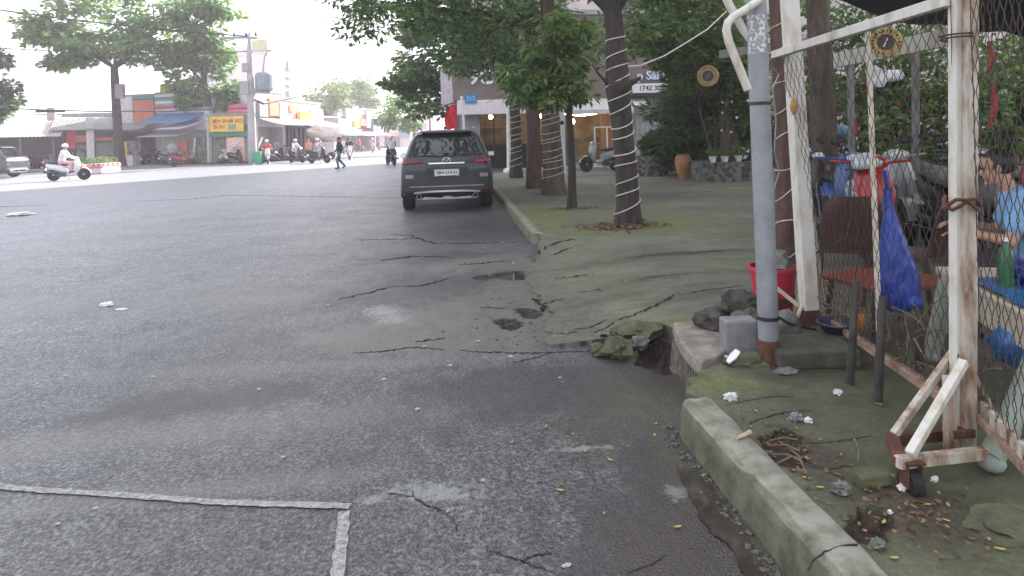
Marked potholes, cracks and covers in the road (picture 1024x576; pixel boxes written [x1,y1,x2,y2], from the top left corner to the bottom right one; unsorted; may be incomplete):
pothole [633,339,672,375]
pothole [472,271,526,281]
crack [387,490,459,532]
crack [734,396,810,423]
crack [531,273,601,312]
crack [555,286,735,338]
crack [489,550,552,572]
crack [538,239,572,255]
pothole [492,308,544,331]
